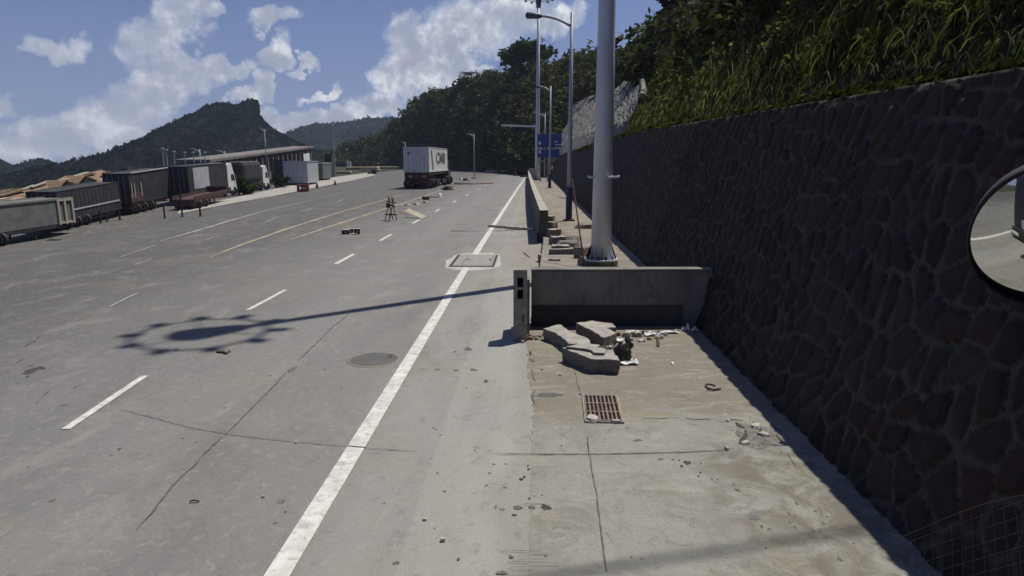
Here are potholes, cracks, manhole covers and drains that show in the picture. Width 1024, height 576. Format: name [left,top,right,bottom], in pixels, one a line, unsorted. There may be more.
manhole cover [445,252,502,271]
manhole cover [347,352,400,368]
drain grate [582,394,624,424]
